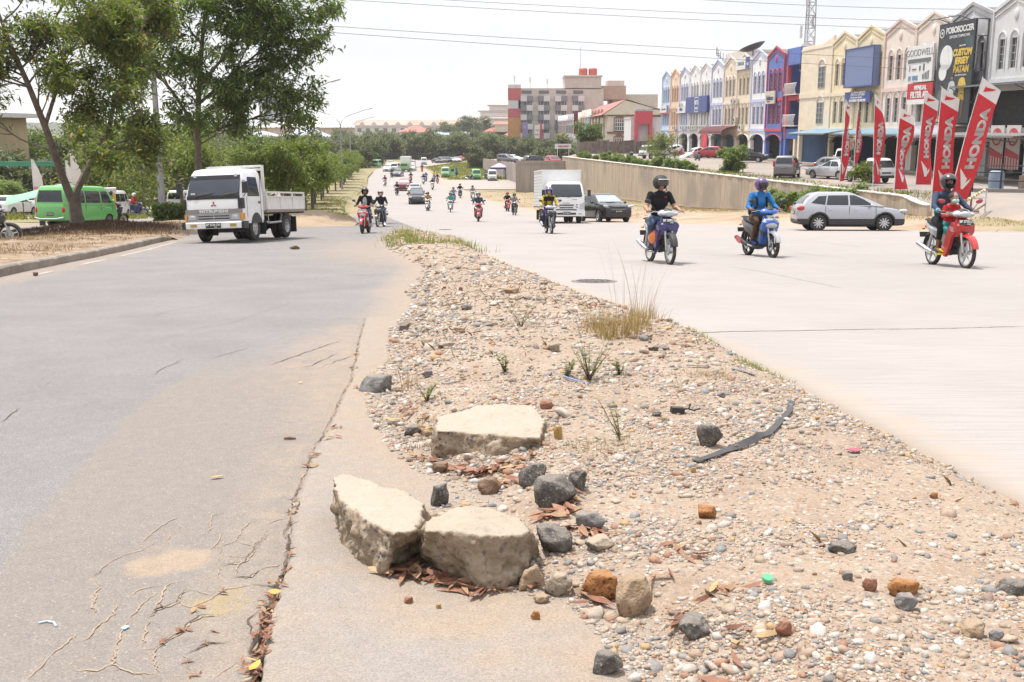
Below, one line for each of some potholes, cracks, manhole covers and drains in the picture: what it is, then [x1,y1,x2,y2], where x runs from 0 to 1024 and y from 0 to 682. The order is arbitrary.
crack [29,321,365,682]
